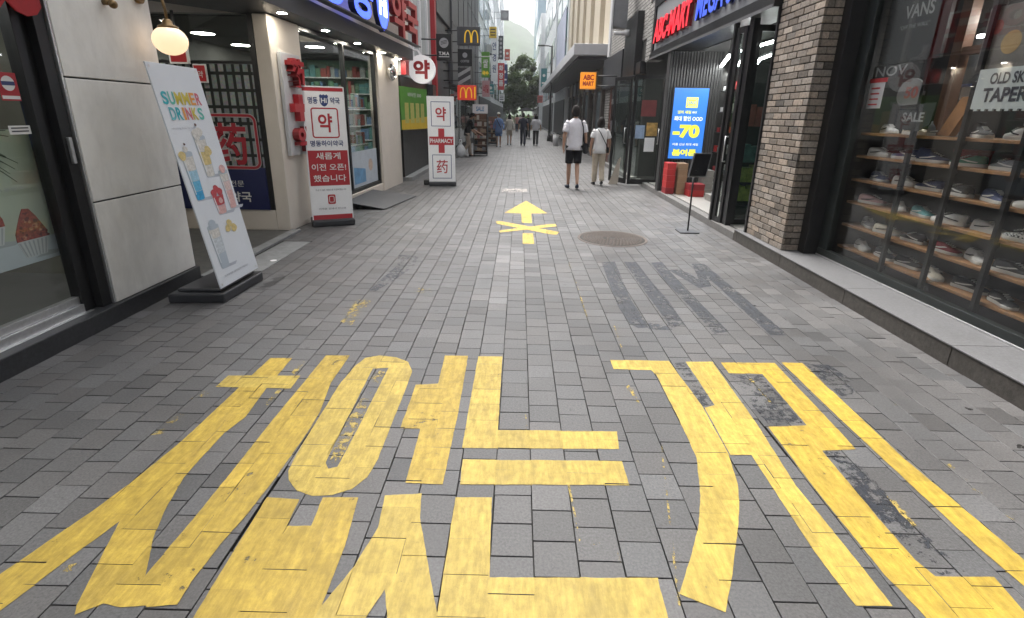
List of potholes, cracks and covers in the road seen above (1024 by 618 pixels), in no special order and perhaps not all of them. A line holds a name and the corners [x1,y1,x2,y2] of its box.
manhole cover [577,231,648,247]
